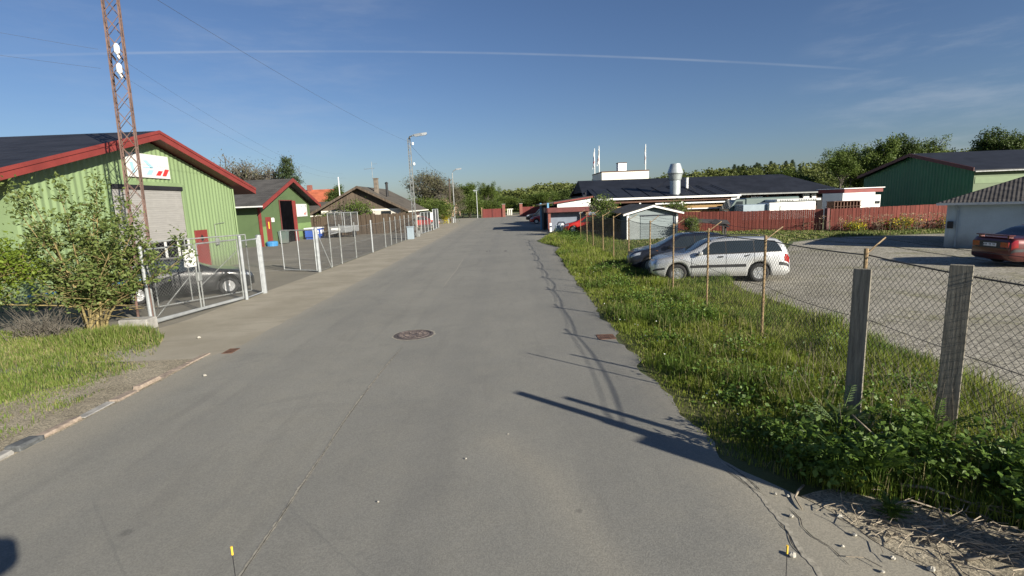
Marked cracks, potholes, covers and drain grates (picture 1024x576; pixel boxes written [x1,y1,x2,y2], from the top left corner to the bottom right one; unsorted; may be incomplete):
manhole cover [392,329,436,341]
crack [719,460,847,576]
